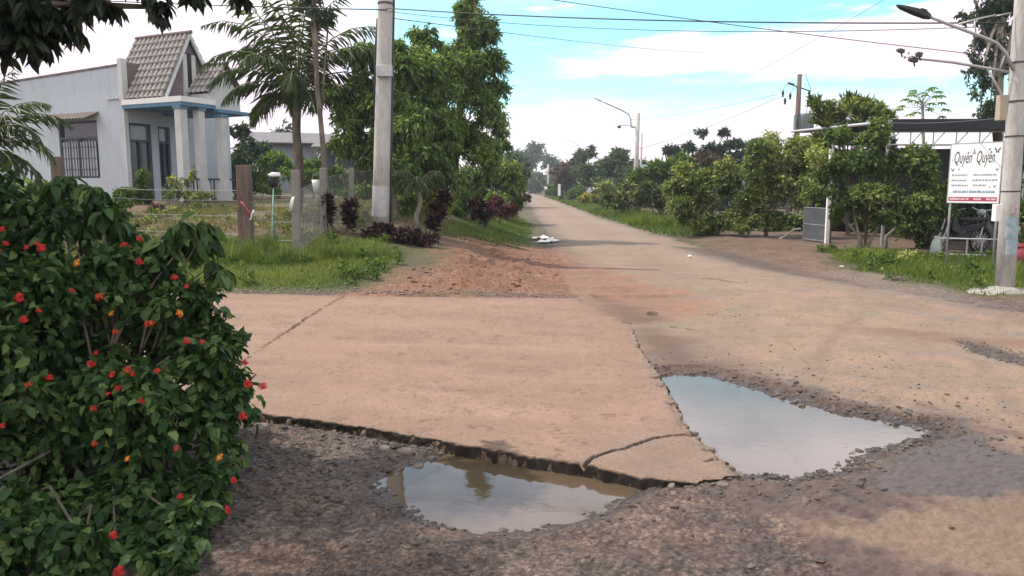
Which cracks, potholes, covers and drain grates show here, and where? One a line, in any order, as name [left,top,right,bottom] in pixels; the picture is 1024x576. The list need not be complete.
pothole [654,365,973,484]
crack [583,433,713,469]
pothole [350,441,669,540]
